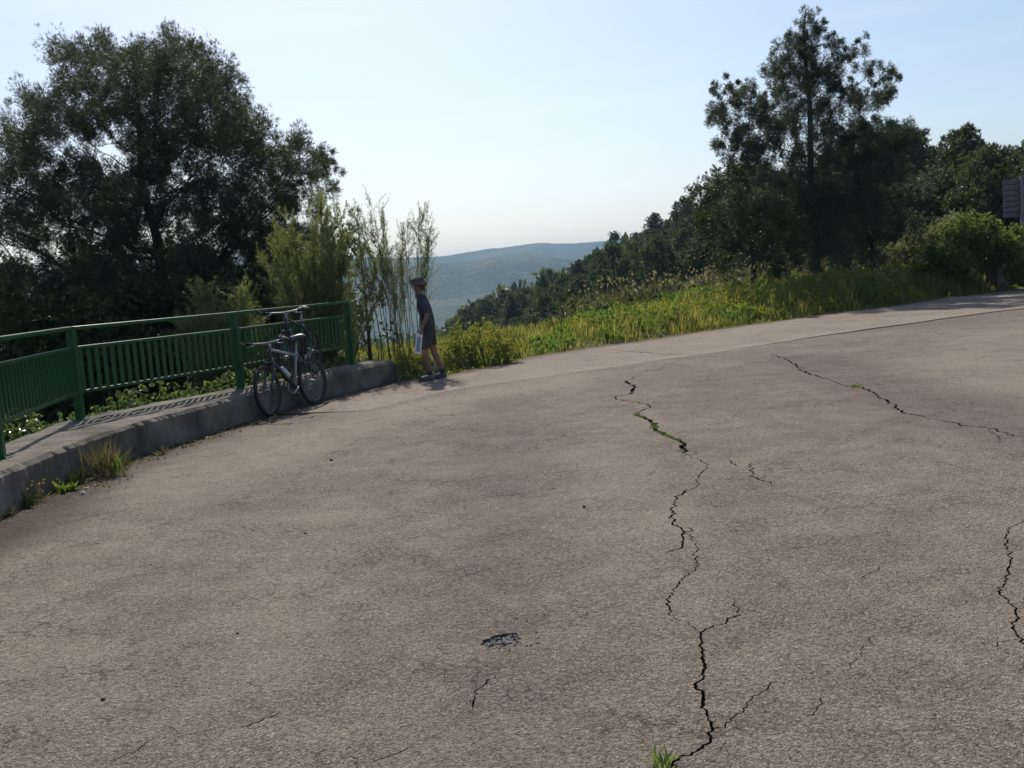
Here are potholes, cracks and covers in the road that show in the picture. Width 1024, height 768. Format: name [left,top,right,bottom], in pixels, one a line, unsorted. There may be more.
pothole [480,631,540,651]
crack [995,521,1024,647]
crack [614,379,780,768]
crack [778,356,1024,443]
